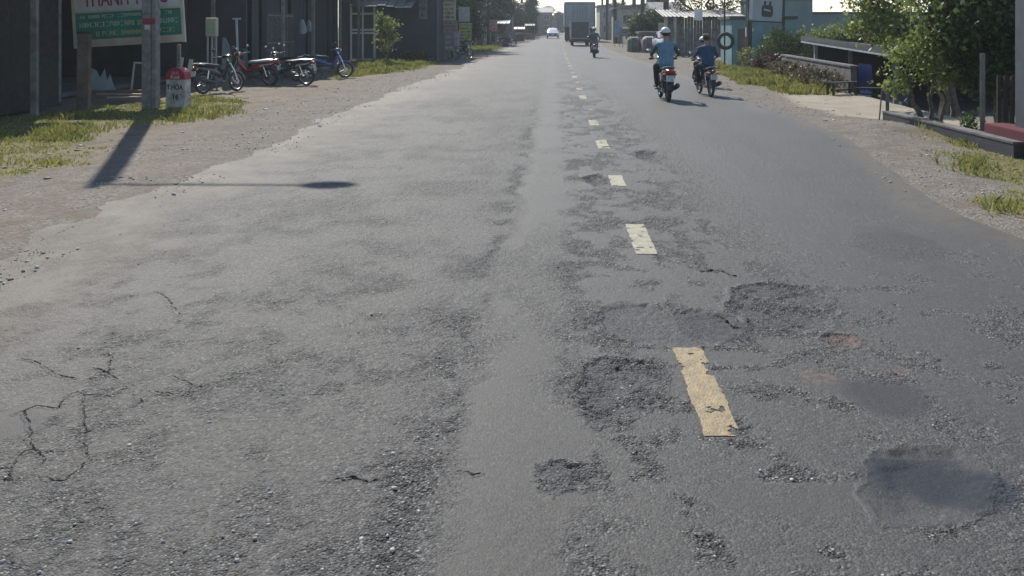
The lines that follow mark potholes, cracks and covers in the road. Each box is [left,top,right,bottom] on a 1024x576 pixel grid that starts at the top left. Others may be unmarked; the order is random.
crack [148,290,187,324]
pothole [717,280,849,339]
pothole [573,172,616,188]
crack [3,352,210,484]
crack [326,471,404,485]
crack [697,268,742,278]
pothole [559,353,675,432]
pothole [526,457,612,500]
